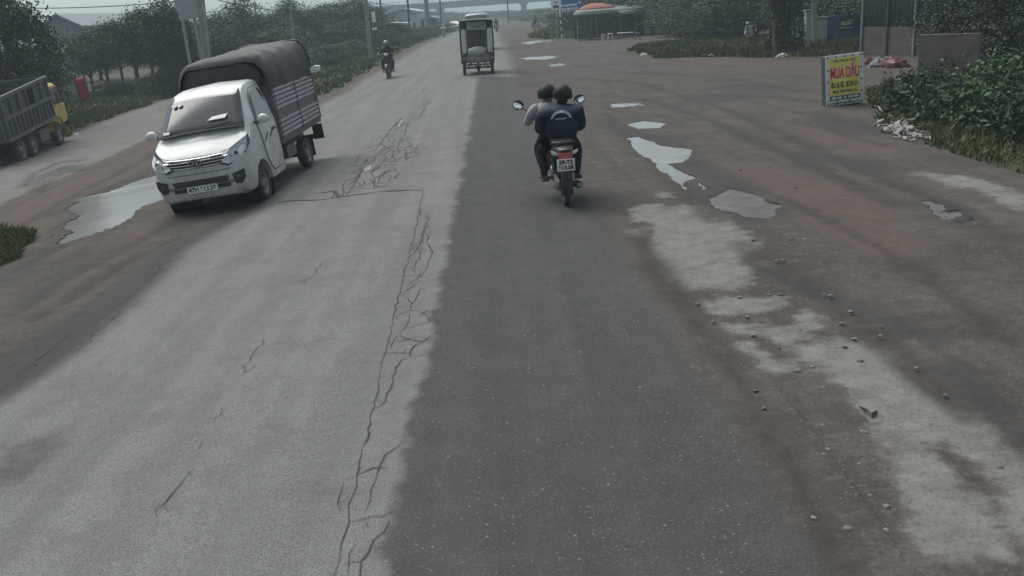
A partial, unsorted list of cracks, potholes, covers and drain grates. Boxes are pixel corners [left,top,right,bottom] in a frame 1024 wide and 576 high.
pothole [37,174,165,250]
pothole [597,101,662,109]
pothole [907,197,990,228]
crack [155,341,264,517]
pothole [683,177,802,221]
pothole [612,119,680,132]
crack [330,189,438,576]
pothole [613,134,730,199]
